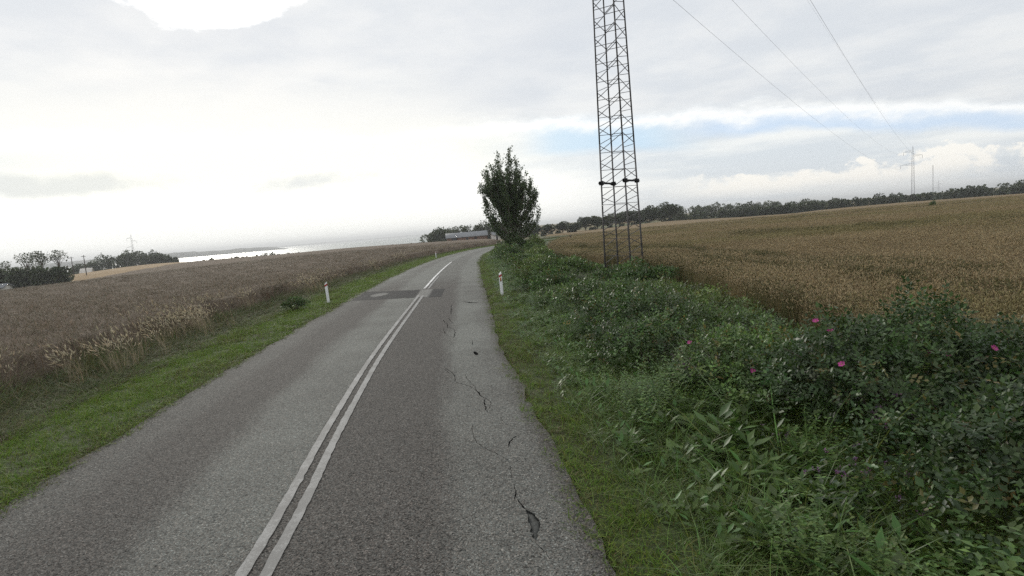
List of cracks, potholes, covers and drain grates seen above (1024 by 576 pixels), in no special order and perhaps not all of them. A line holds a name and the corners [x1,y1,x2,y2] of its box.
pothole [526,510,541,542]
crack [445,368,525,508]
